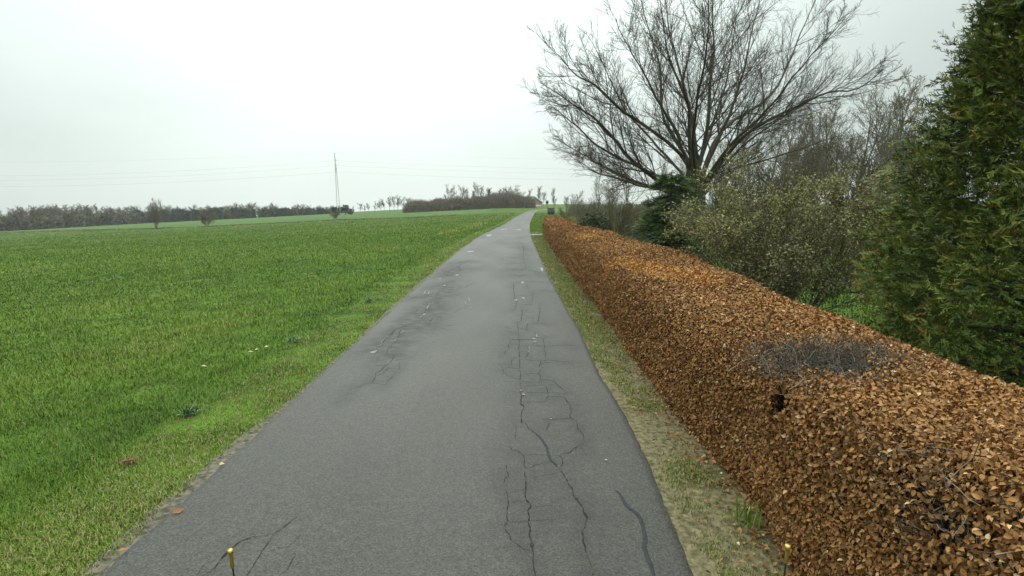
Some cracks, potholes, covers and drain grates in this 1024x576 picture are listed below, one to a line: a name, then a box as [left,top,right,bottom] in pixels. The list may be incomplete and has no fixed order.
crack [503,281,594,576]
crack [200,518,300,576]
crack [345,267,472,399]
